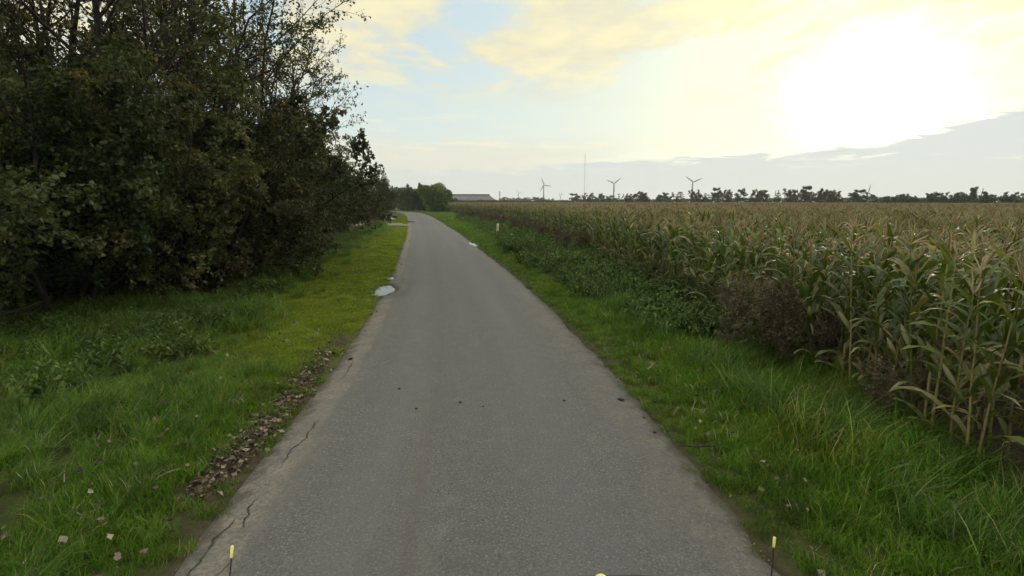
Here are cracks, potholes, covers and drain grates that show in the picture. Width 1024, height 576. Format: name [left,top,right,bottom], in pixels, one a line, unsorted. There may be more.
crack [187,501,254,576]
pothole [368,284,397,297]
